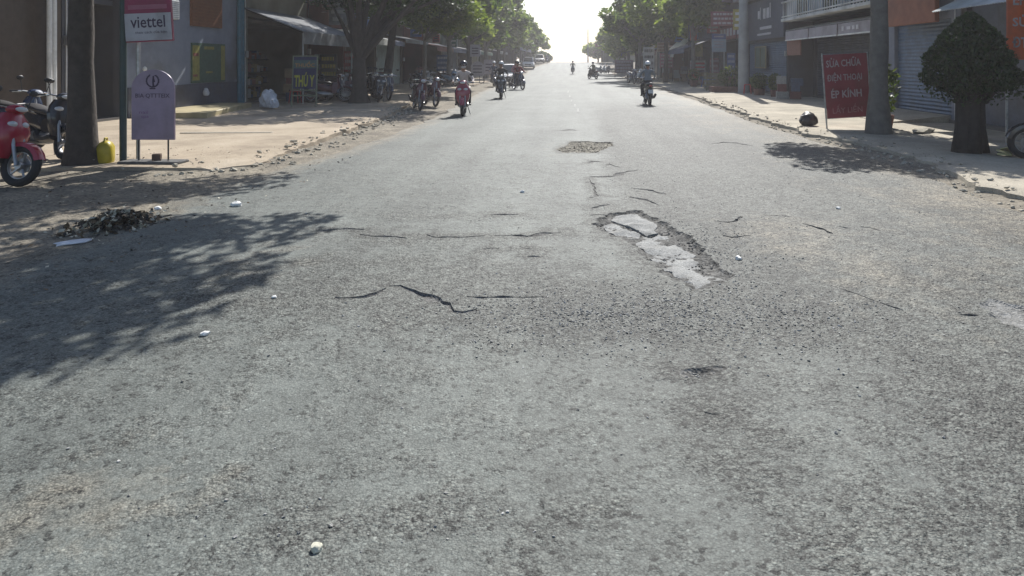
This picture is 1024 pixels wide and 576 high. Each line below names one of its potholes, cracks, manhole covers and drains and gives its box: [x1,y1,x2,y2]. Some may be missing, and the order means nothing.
crack [323,228,552,257]
crack [335,285,536,313]
crack [770,215,880,234]
crack [587,161,666,216]
pothole [679,365,727,378]
pothole [556,141,613,153]
crack [718,217,750,238]
pothole [591,210,735,291]
